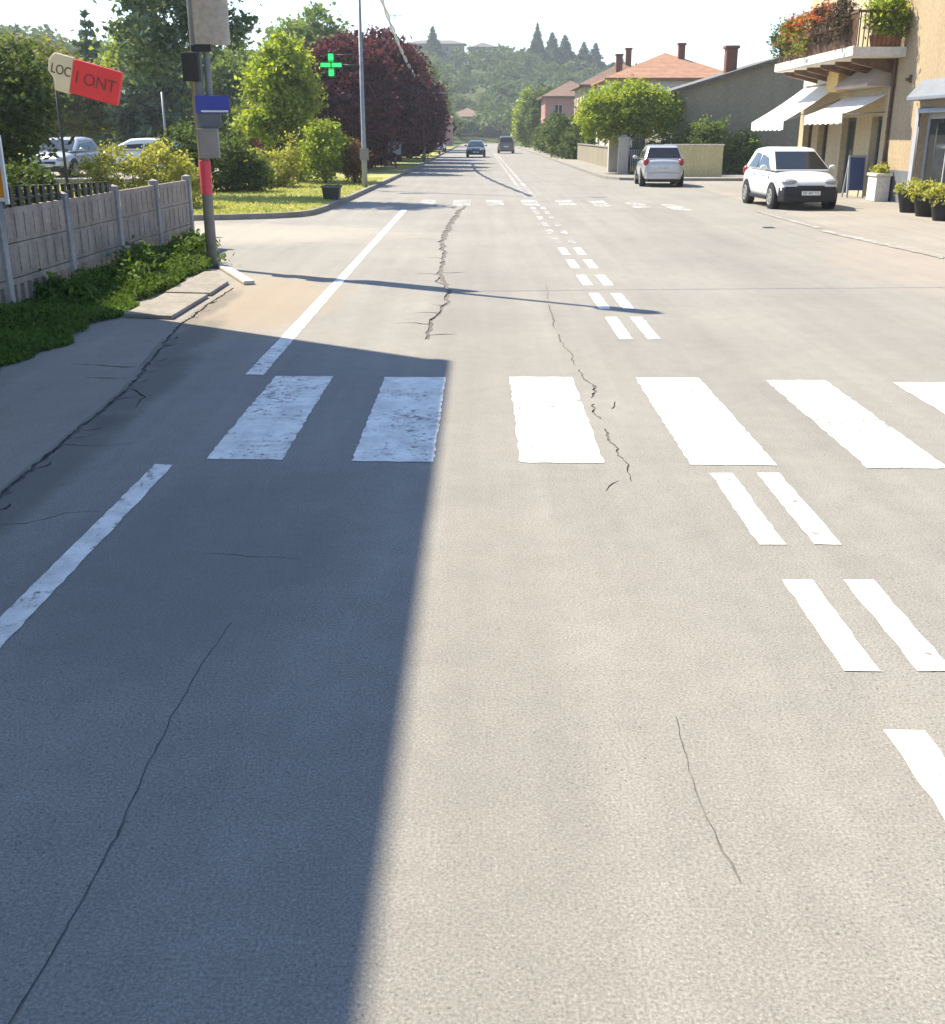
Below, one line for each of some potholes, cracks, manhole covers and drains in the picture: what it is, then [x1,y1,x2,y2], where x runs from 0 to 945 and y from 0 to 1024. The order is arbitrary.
crack [0,288,233,524]
crack [546,286,632,491]
crack [8,623,231,1024]
crack [676,717,742,884]
crack [418,206,477,339]
